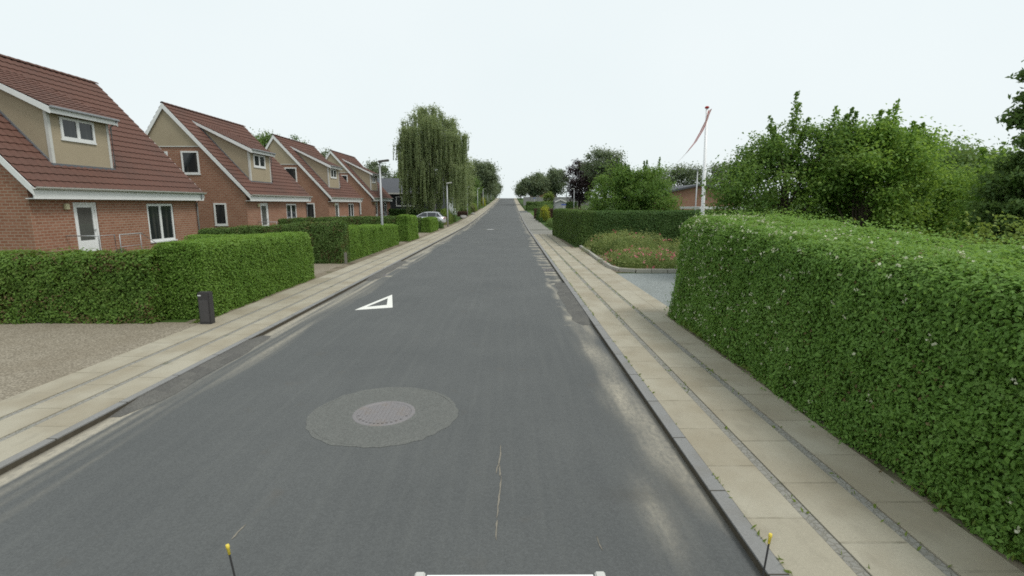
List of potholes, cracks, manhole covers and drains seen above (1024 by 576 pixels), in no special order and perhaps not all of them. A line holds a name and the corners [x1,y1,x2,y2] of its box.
manhole cover [305,387,459,448]
